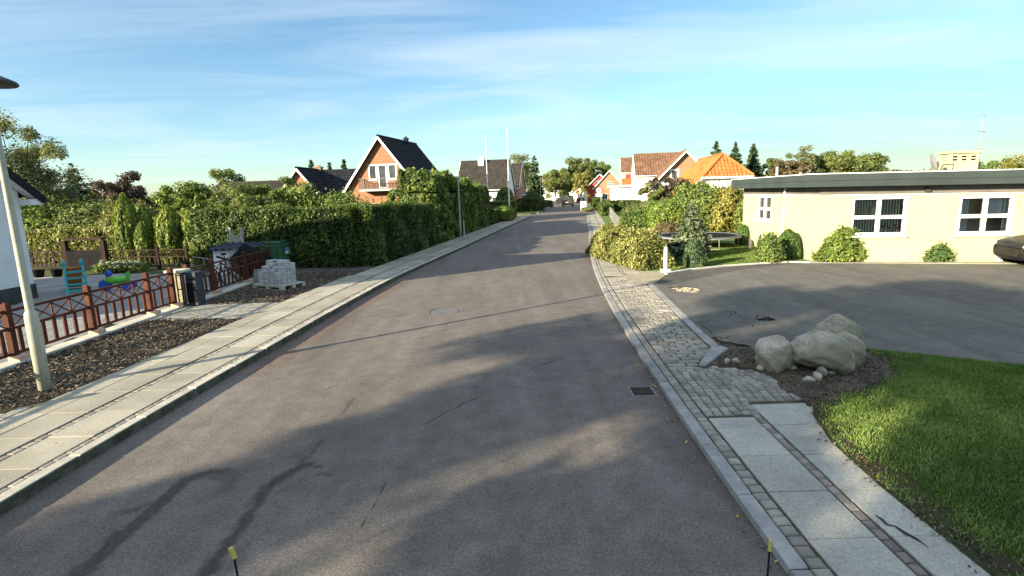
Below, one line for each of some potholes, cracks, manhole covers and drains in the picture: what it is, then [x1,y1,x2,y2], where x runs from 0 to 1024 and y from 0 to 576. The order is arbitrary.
drain grate [627,386,658,397]
crack [695,311,779,340]
crack [876,515,929,548]
